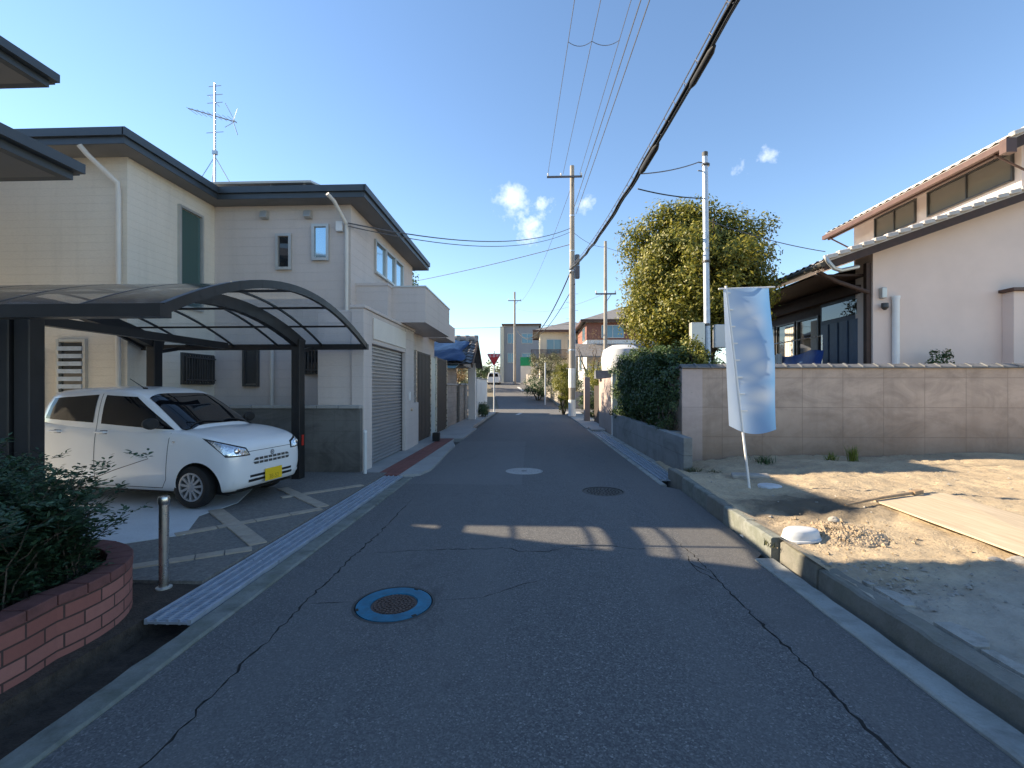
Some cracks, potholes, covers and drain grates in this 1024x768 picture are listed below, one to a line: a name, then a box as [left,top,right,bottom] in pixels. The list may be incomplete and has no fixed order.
crack [664,532,911,768]
manhole cover [351,586,435,624]
crack [138,500,662,768]
manhole cover [582,487,625,496]
